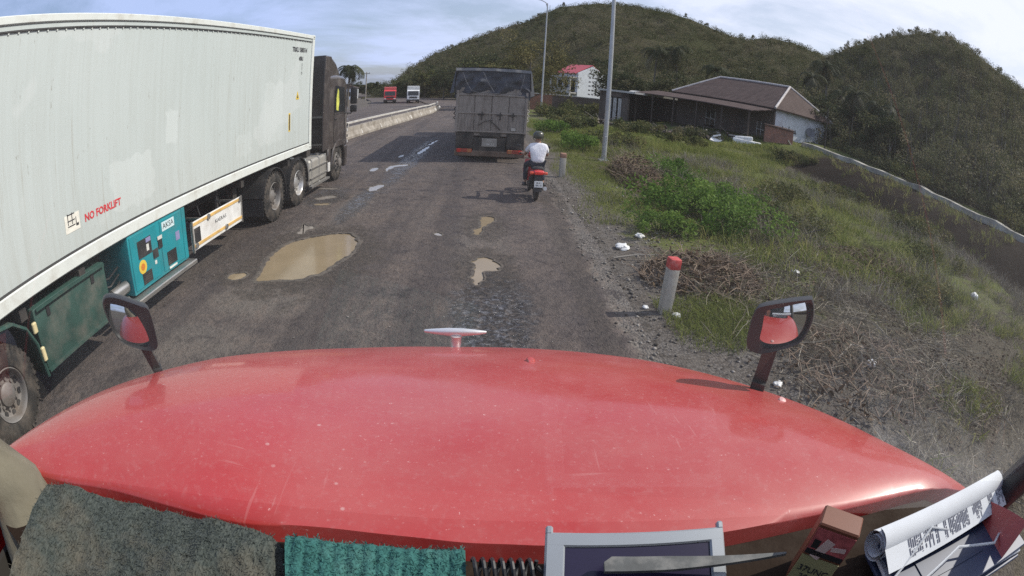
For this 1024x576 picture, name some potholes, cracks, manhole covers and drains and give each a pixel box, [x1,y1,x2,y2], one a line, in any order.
pothole [225,271,250,281]
pothole [250,232,363,283]
pothole [470,216,497,236]
pothole [467,256,504,286]
